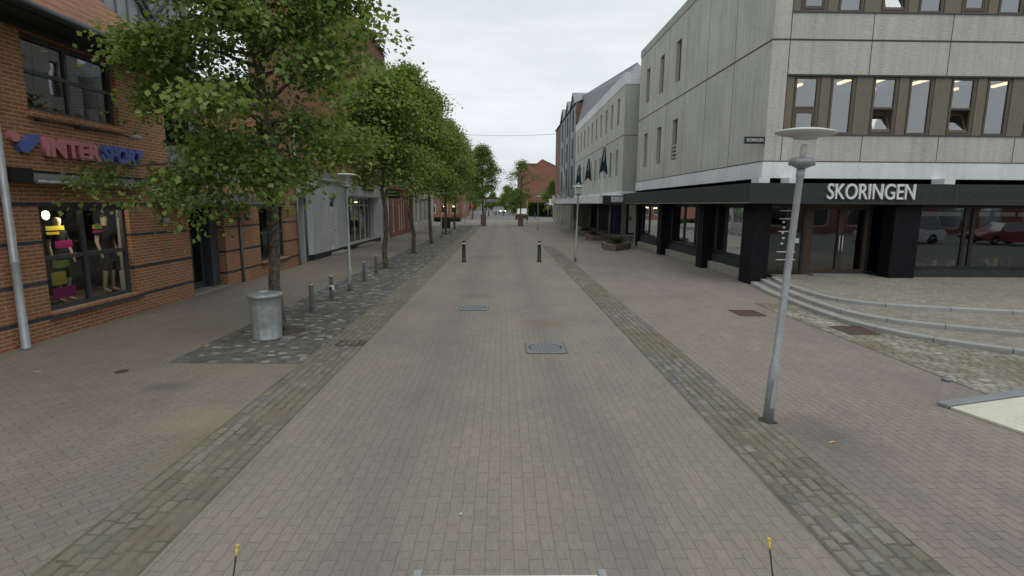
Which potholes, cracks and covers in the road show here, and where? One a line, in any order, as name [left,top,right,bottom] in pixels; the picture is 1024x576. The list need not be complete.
manhole cover [524,343,568,354]
manhole cover [830,326,879,335]
